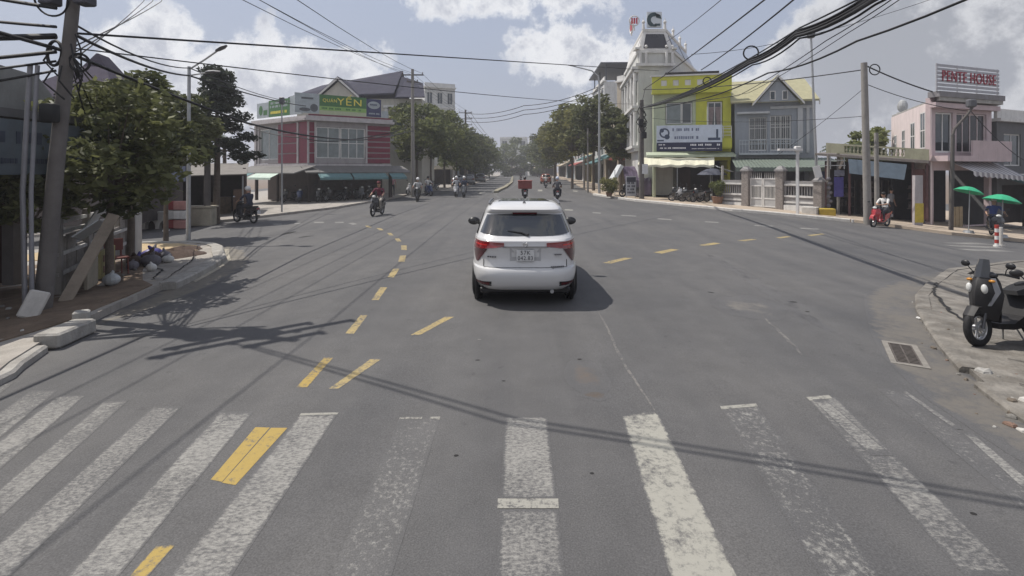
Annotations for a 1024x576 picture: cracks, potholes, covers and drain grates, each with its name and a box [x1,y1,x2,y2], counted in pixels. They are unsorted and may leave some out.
drain grate [881,340,931,370]
